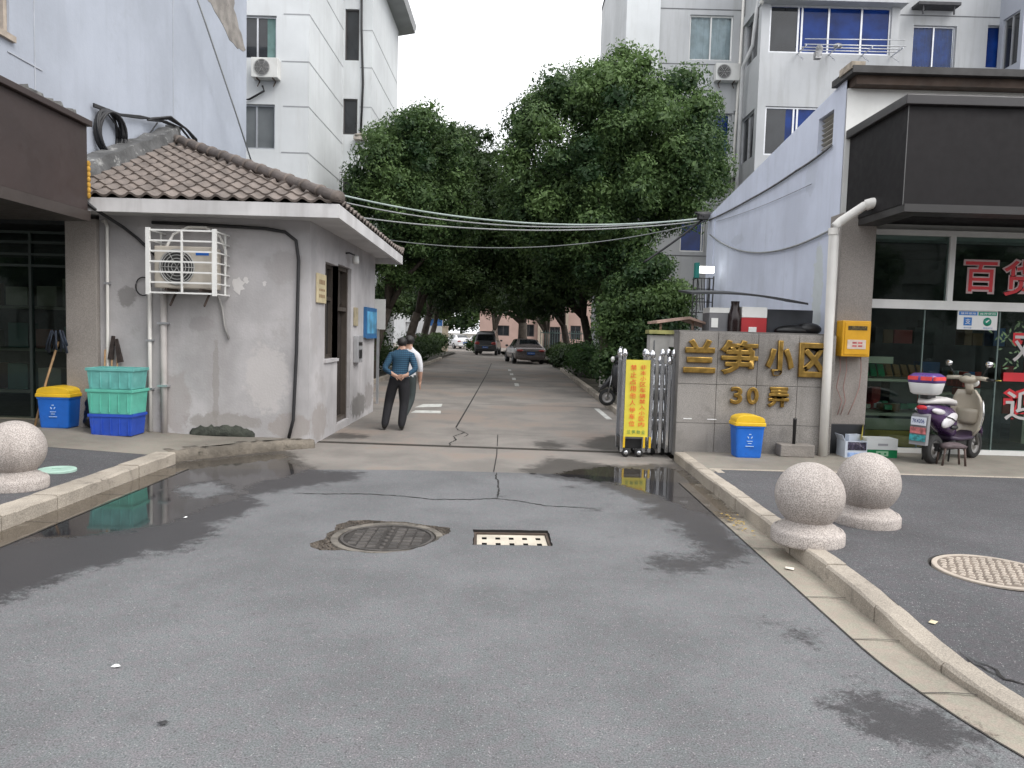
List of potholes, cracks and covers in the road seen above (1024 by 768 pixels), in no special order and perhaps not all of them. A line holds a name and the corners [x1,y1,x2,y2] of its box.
crack [961,653,1024,684]
drain grate [472,529,553,546]
manhole cover [310,520,451,553]
manhole cover [927,554,1024,592]
crack [305,473,583,508]
